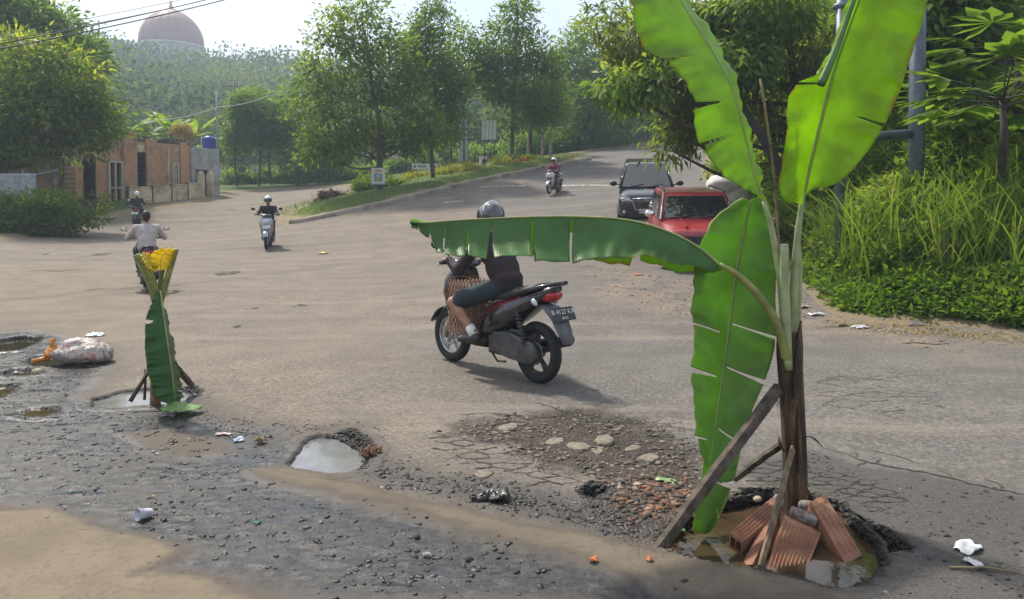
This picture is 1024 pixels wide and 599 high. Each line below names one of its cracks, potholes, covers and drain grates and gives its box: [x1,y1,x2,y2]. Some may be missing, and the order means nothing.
pothole [0,403,74,422]
crack [805,373,966,412]
pothole [327,425,392,458]
pothole [267,430,384,480]
crack [742,444,1024,512]
crack [430,431,580,486]
pothole [725,482,780,496]
pothole [75,384,200,412]
pothole [0,334,55,353]
pothole [853,509,940,563]
